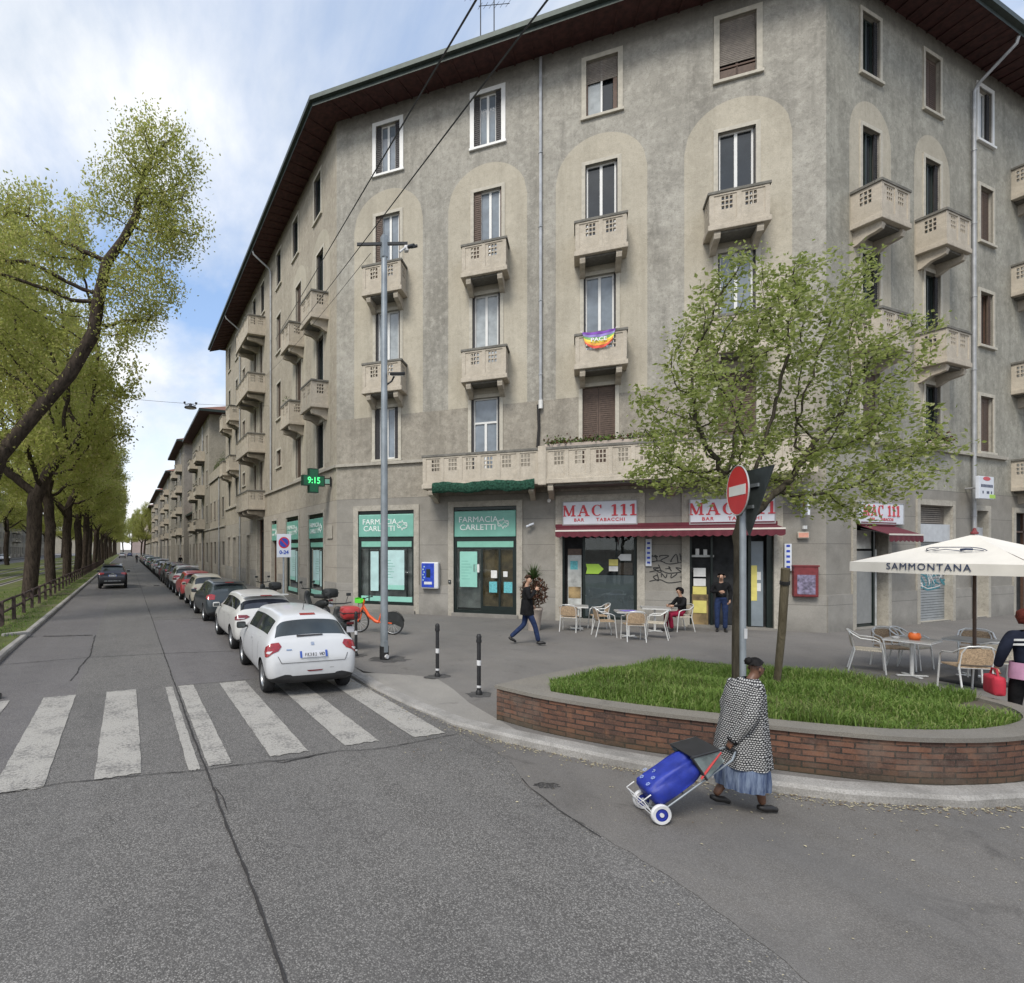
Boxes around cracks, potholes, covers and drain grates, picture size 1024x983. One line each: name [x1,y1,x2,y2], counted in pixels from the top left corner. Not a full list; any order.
crack [13,635,216,681]
